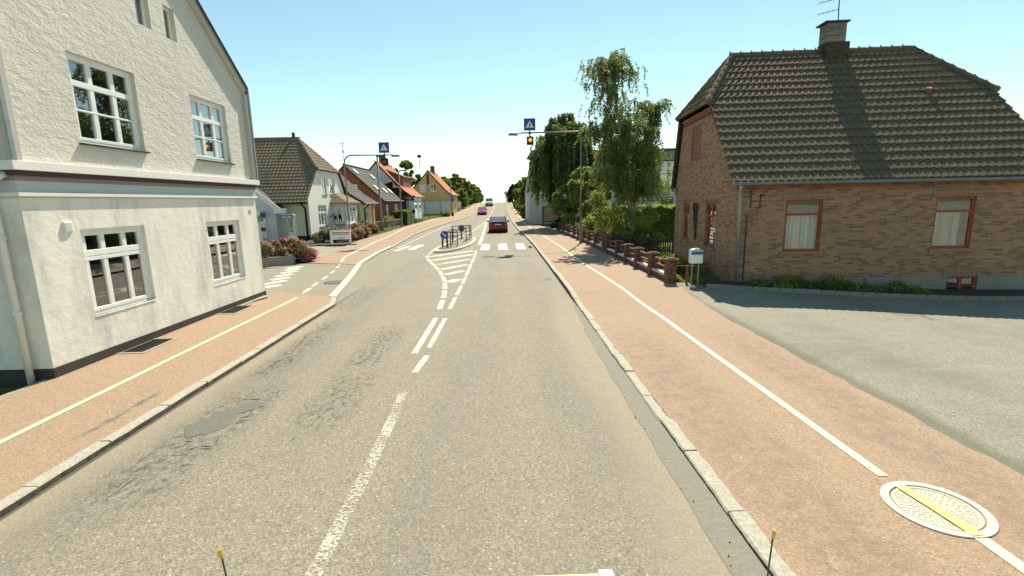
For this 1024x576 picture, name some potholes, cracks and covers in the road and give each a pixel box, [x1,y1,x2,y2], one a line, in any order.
crack [106,389,280,499]
manhole cover [880,481,999,539]
